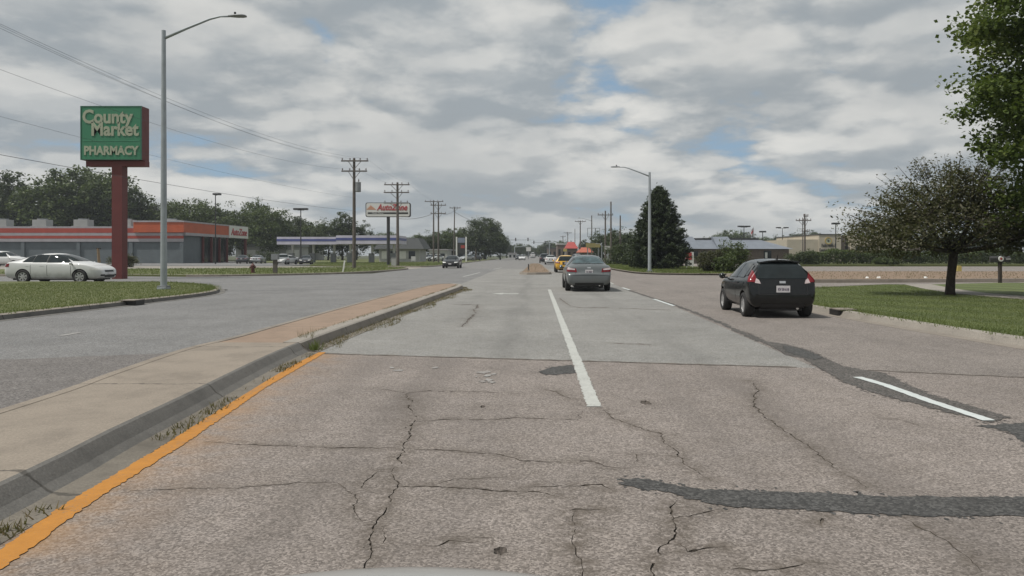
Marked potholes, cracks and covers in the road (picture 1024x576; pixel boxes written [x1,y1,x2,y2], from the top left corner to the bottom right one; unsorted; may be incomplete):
crack [129,389,624,568]
drain grate [829,308,856,316]
crack [606,412,703,476]
crack [750,381,866,487]
crack [650,503,715,576]
